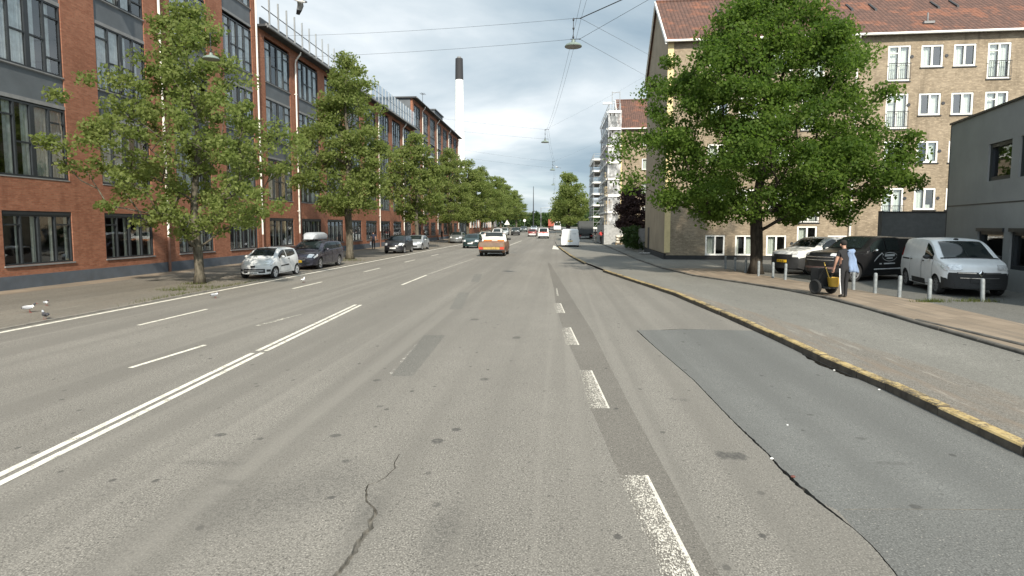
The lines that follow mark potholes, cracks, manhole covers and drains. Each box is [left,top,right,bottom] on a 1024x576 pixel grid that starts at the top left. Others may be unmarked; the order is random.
crack [333,455,399,576]
